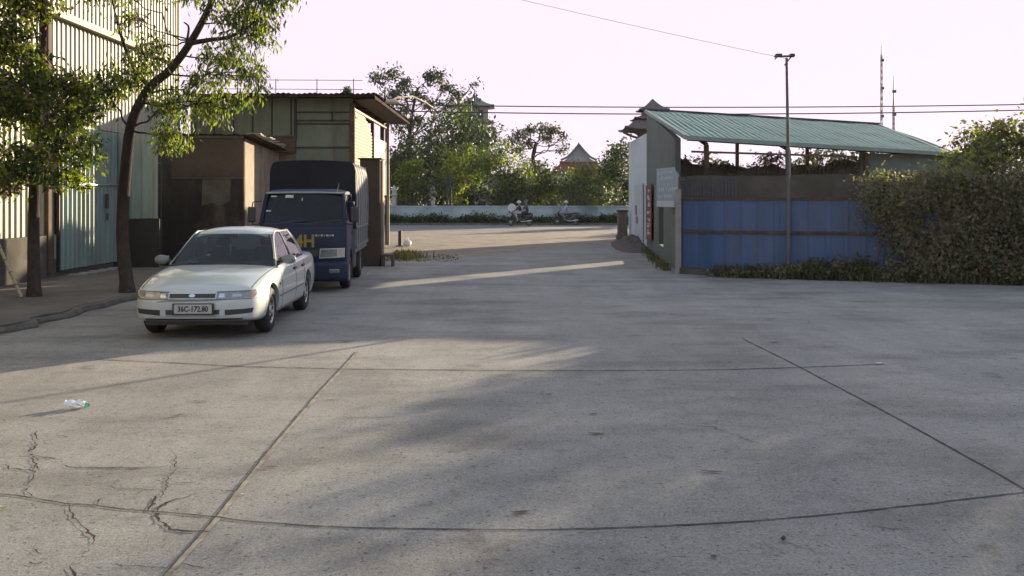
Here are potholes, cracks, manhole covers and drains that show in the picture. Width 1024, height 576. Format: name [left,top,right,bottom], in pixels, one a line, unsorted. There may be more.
crack [5,431,233,576]
